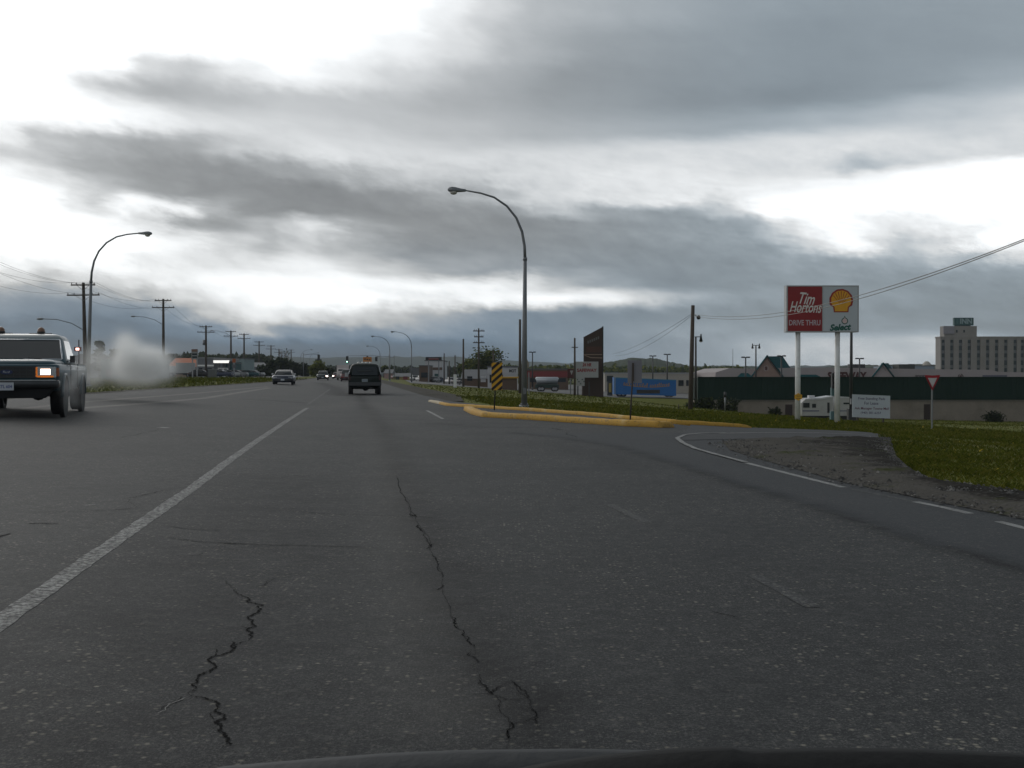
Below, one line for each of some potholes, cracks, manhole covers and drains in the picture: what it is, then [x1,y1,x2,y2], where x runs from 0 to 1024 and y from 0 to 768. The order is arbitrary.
crack [158,577,279,747]
crack [168,526,374,556]
crack [272,478,541,743]
